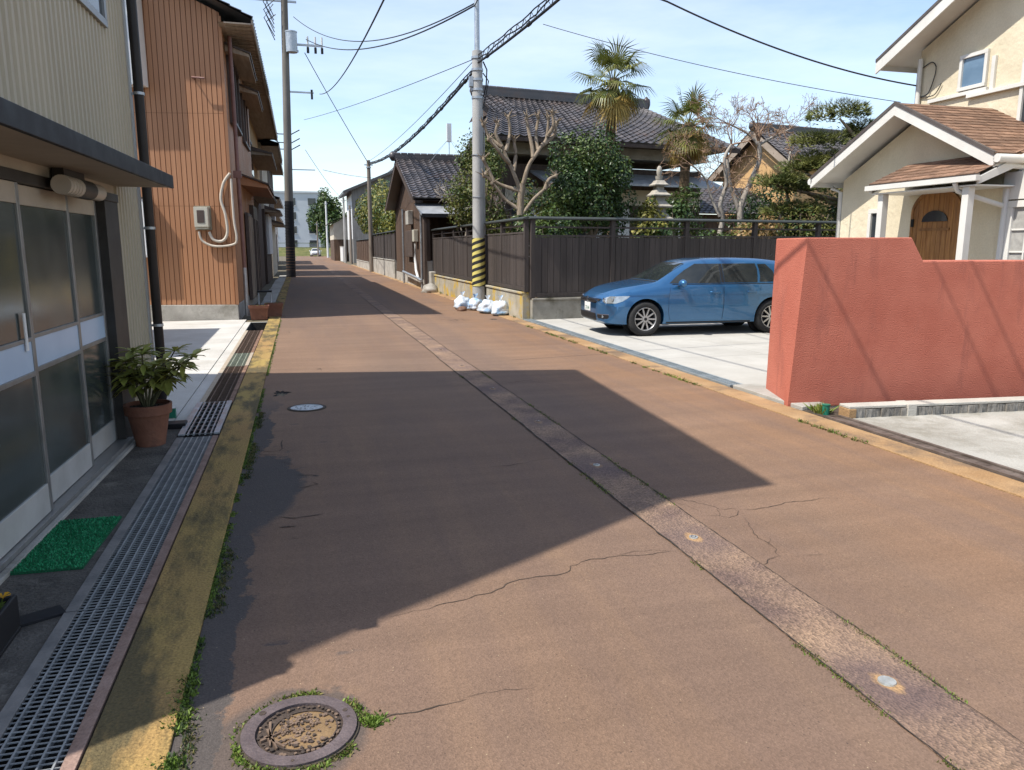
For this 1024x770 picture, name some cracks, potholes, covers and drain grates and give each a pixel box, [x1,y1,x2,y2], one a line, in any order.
drain grate [178,400,232,436]
crack [670,499,816,564]
drain grate [66,435,219,614]
crack [399,550,671,615]
manhole cover [287,403,326,412]
crack [360,688,528,726]
drain grate [0,603,146,770]
manhole cover [237,695,360,770]
